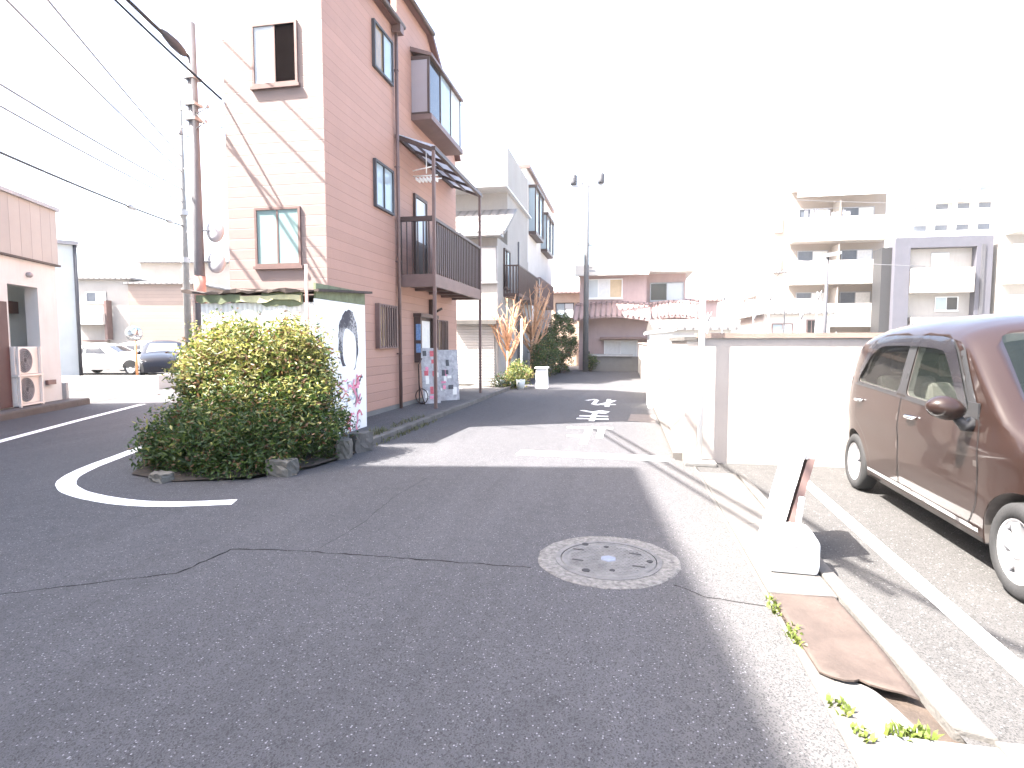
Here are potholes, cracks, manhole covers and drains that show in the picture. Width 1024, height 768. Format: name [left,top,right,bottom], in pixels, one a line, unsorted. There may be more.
manhole cover [538,536,681,590]
crack [4,483,531,594]
crack [674,585,766,607]
